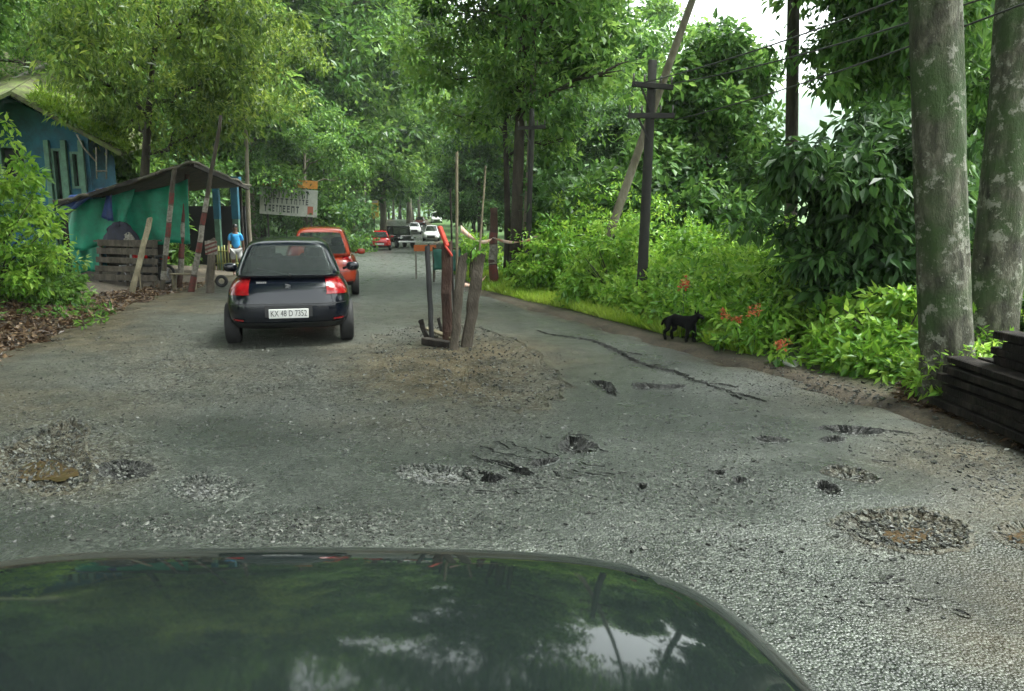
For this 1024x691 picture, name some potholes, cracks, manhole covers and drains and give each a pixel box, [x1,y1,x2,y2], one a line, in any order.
crack [534,330,767,402]
pothole [753,435,793,444]
pothole [392,462,484,488]
pothole [818,435,848,444]
pothole [824,506,980,555]
pothole [526,457,562,468]
pothole [92,459,160,483]
pothole [168,473,239,502]
pothole [819,464,884,483]
pothole [490,459,536,477]
pothole [556,433,600,456]
pothole [0,416,99,497]
